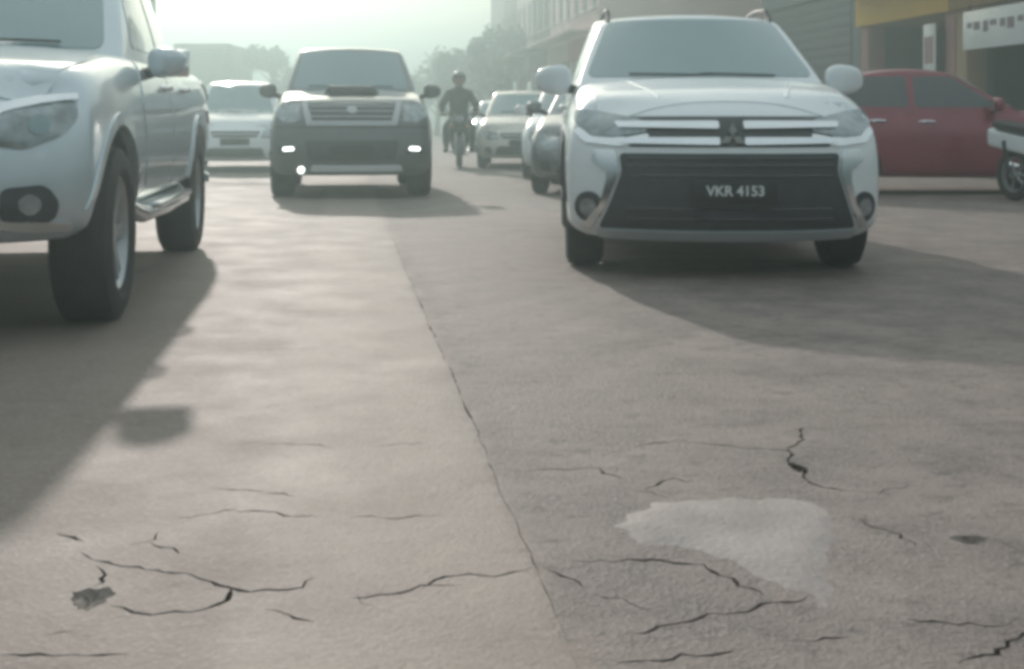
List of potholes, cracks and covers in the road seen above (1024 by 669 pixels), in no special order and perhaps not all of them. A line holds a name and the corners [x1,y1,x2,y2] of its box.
pothole [71,587,117,612]
crack [906,618,1024,664]
crack [862,520,916,547]
crack [354,558,846,663]
crack [629,427,908,493]
pothole [949,535,987,545]
crack [57,533,315,622]
crack [177,488,318,518]
